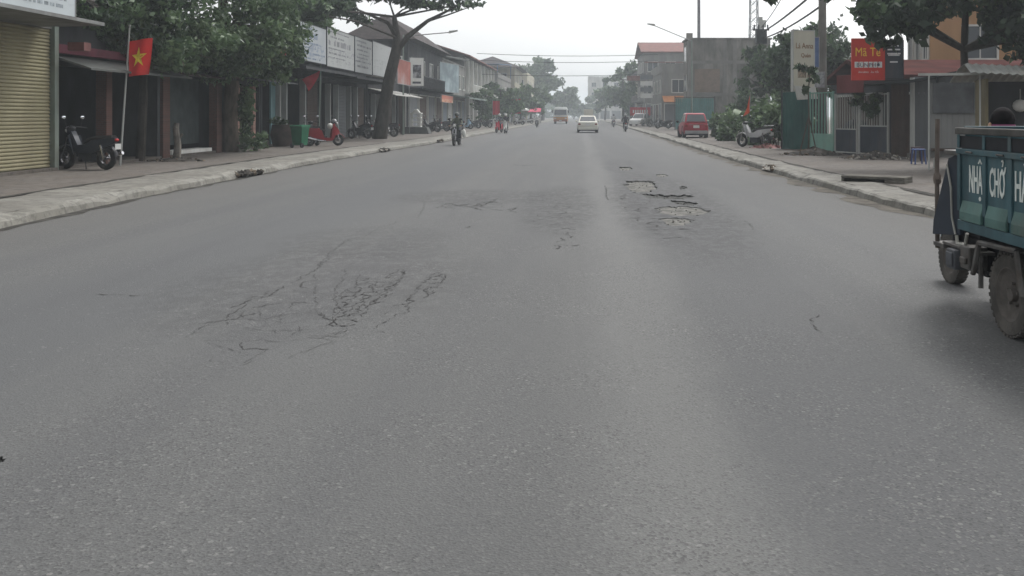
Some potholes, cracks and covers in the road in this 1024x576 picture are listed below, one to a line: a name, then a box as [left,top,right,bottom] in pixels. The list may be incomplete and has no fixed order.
pothole [623,180,657,193]
crack [534,198,576,249]
pothole [658,218,695,226]
crack [436,198,519,227]
crack [604,186,754,245]
crack [190,202,446,364]
pothole [654,206,711,216]
